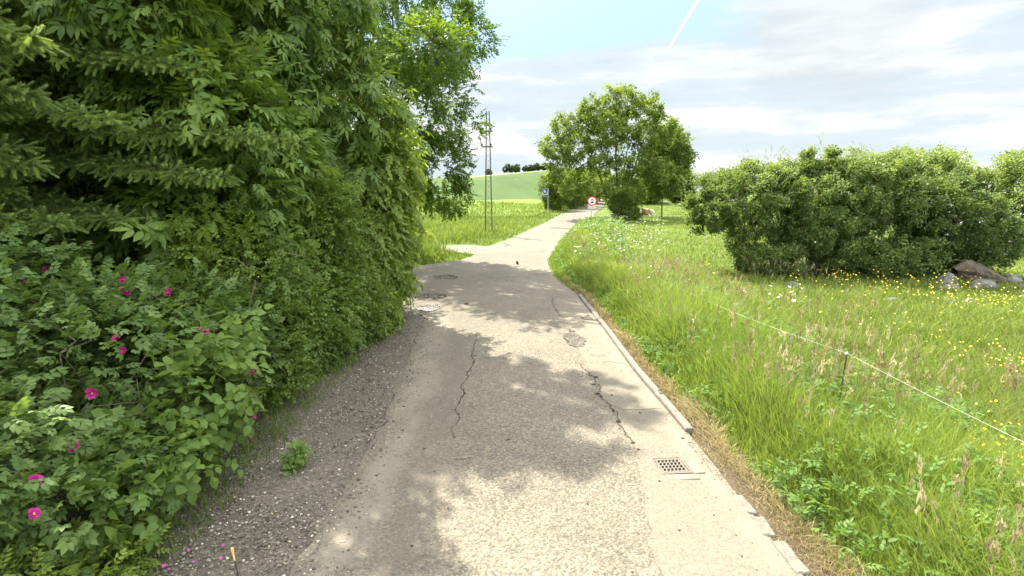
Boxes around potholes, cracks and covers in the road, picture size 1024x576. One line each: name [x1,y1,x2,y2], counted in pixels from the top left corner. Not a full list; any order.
drain grate [650,456,705,480]
crack [451,338,477,437]
crack [576,355,655,440]
